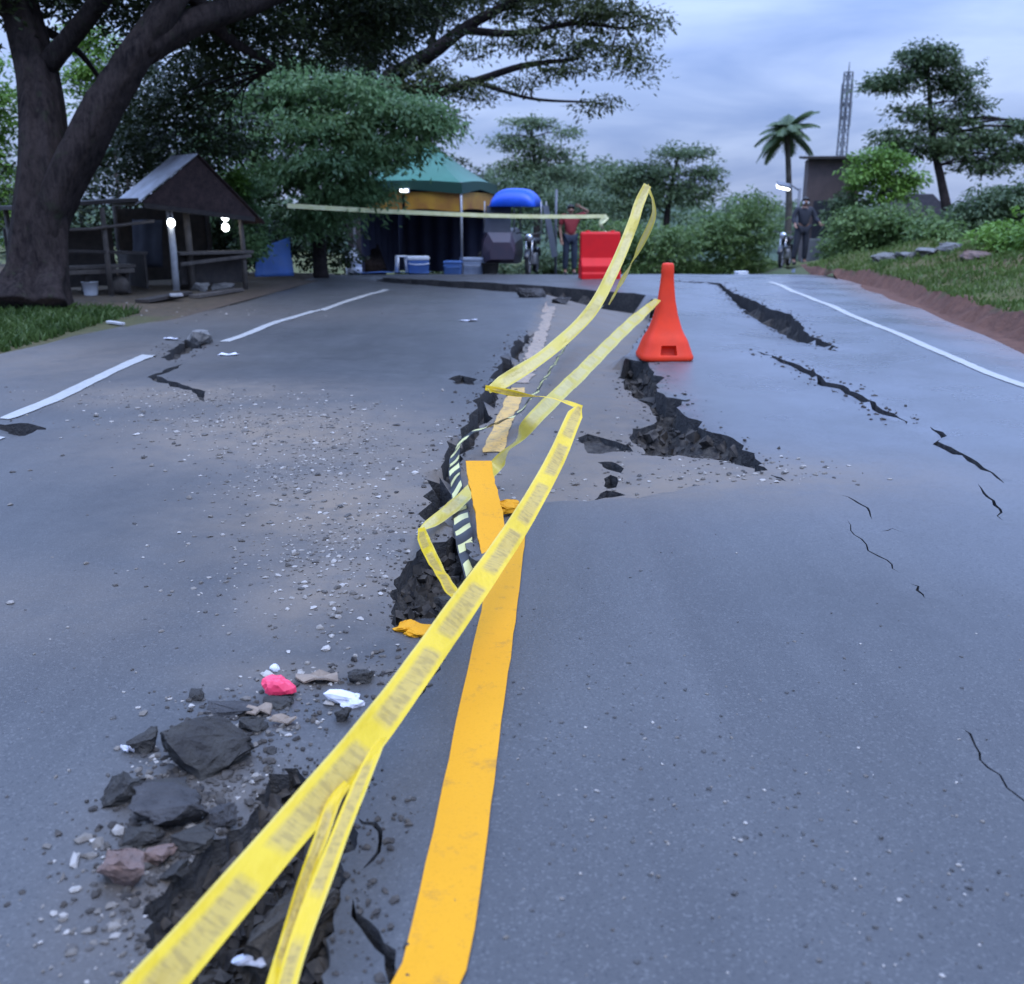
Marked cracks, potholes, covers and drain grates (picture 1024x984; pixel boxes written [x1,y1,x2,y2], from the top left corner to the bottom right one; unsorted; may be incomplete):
crack [965,730,1024,801]
crack [680,281,907,424]
crack [351,818,396,984]
crack [148,364,205,402]
crack [418,334,531,521]
crack [598,462,624,473]
crack [377,278,655,349]
crack [839,494,924,597]
crack [931,428,1004,520]
crack [595,490,624,500]
